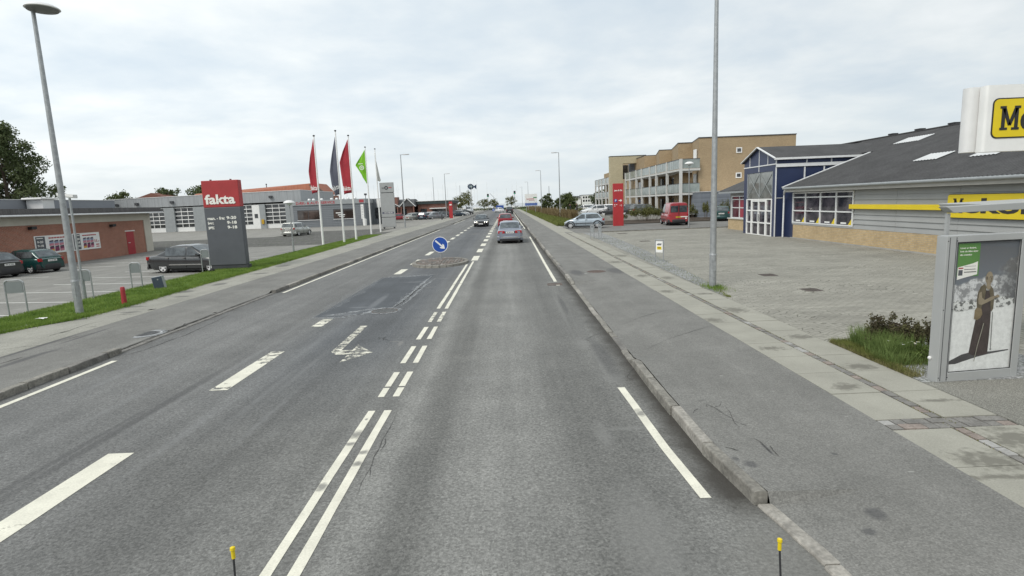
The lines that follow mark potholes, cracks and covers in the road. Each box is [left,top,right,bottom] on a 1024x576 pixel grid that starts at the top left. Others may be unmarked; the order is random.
manhole cover [133,329,168,338]
